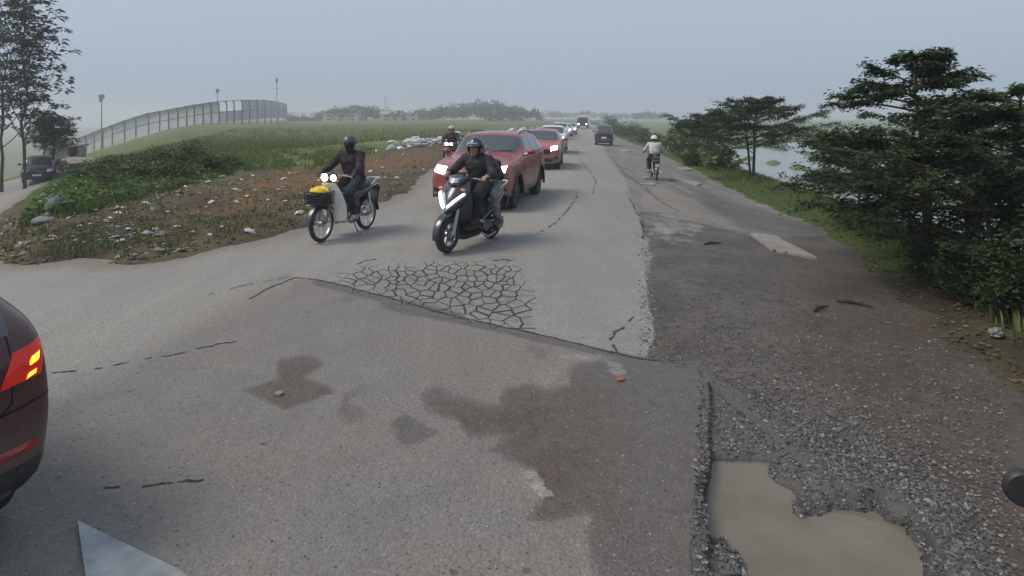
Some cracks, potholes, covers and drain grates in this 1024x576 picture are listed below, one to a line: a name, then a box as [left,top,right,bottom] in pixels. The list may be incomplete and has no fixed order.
crack [538,152,596,234]
crack [52,341,237,373]
crack [103,479,204,488]
pothole [673,371,975,576]
crack [607,153,679,240]
crack [335,259,536,329]
crack [609,305,645,354]
